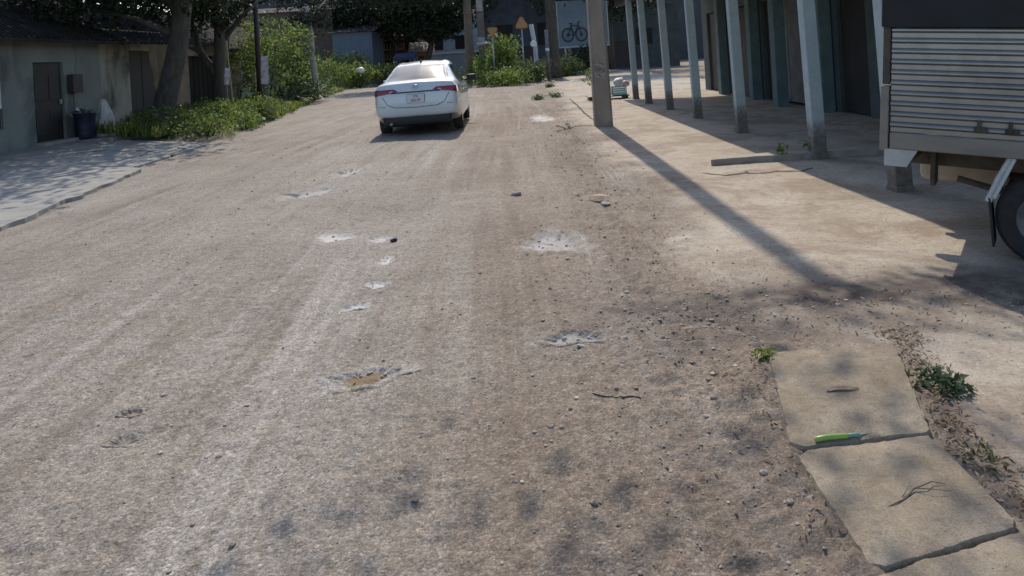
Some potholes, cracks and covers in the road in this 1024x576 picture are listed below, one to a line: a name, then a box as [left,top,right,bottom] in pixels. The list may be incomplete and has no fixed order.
pothole [310,233,362,243]
pothole [100,432,144,448]
pothole [314,363,424,395]
pothole [362,280,394,290]
pothole [533,328,611,348]
pothole [272,184,353,200]
pothole [507,226,593,257]
pothole [336,302,373,314]
pothole [529,114,558,123]
pothole [326,164,375,180]
pothole [373,255,397,266]
pothole [115,408,148,419]
